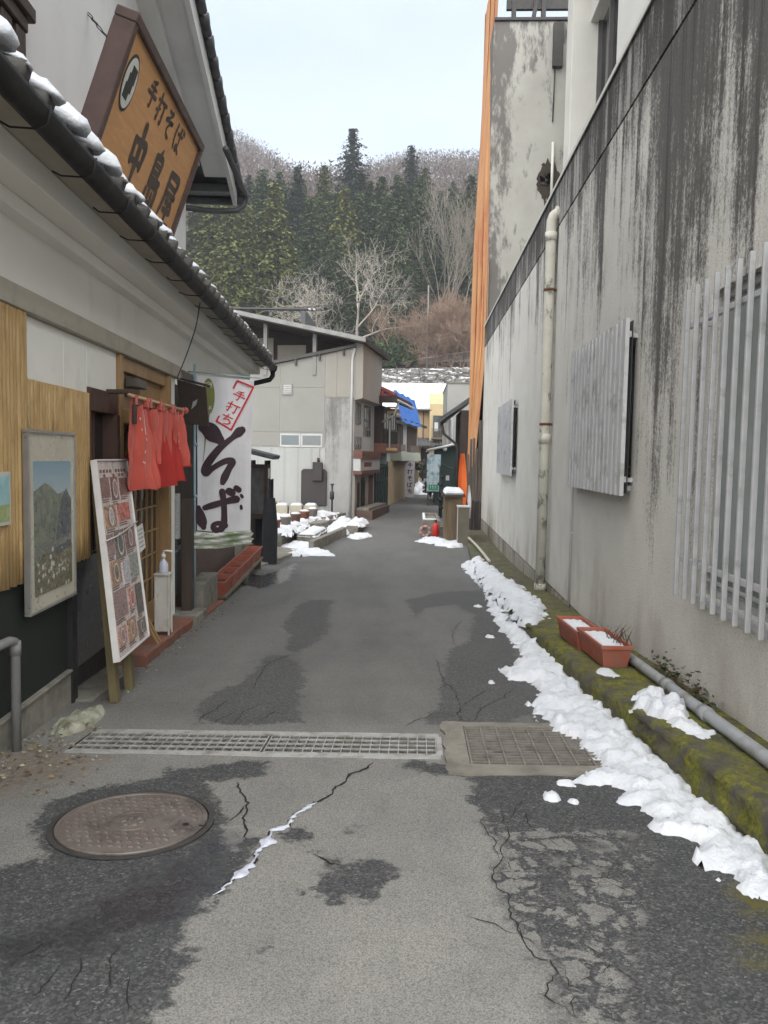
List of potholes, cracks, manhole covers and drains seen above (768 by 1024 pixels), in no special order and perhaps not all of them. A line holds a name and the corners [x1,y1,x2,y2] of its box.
crack [6,940,130,1019]
crack [409,622,511,724]
crack [211,762,373,896]
drain grate [62,729,443,759]
crack [466,797,640,1019]
manhole cover [46,791,214,860]
crack [199,656,286,725]
